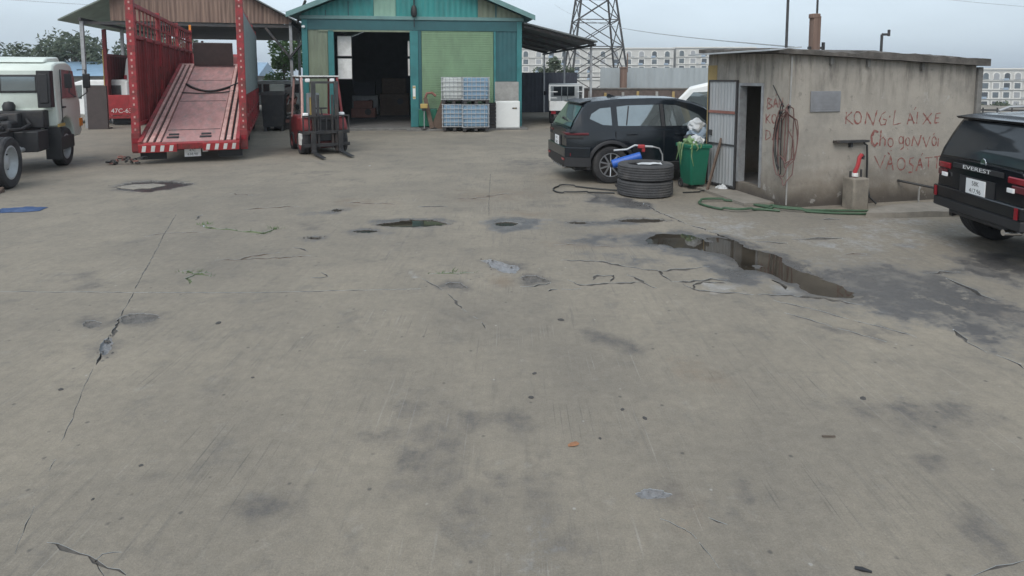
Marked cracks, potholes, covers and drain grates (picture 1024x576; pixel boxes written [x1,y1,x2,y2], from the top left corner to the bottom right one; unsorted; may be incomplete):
crack [954,330,1024,369]
crack [15,193,297,553]
pothole [108,180,194,192]
pothole [375,219,451,227]
crack [427,267,485,328]
crack [530,244,909,341]
pothole [97,334,115,359]
crack [51,543,126,576]
